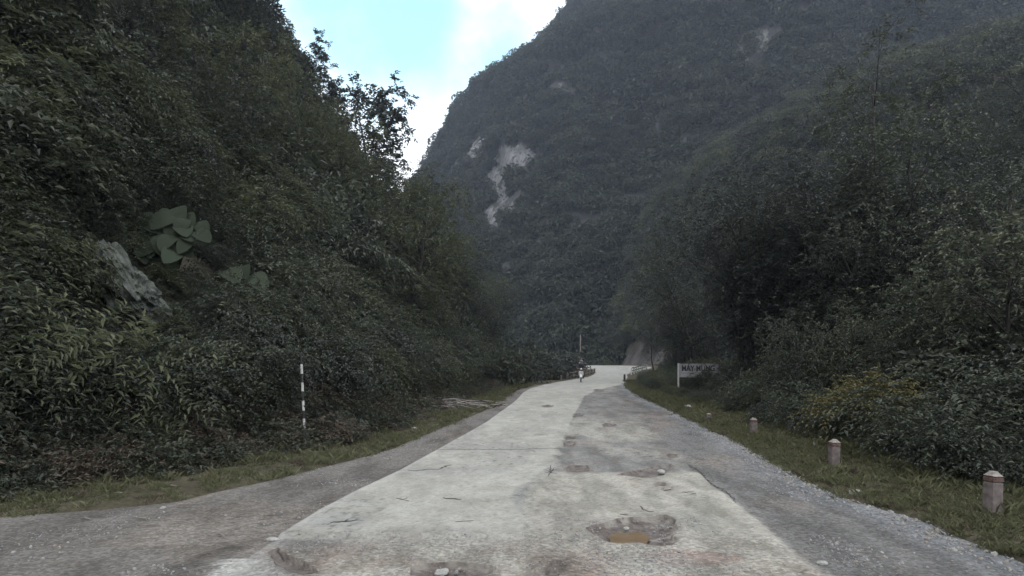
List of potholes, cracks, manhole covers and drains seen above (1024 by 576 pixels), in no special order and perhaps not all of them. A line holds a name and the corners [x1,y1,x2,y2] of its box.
pothole [397,559,509,576]
pothole [610,464,678,479]
crack [690,465,735,501]
pothole [575,512,690,550]
pothole [557,464,596,474]
pothole [558,440,581,448]
pothole [255,545,332,576]
